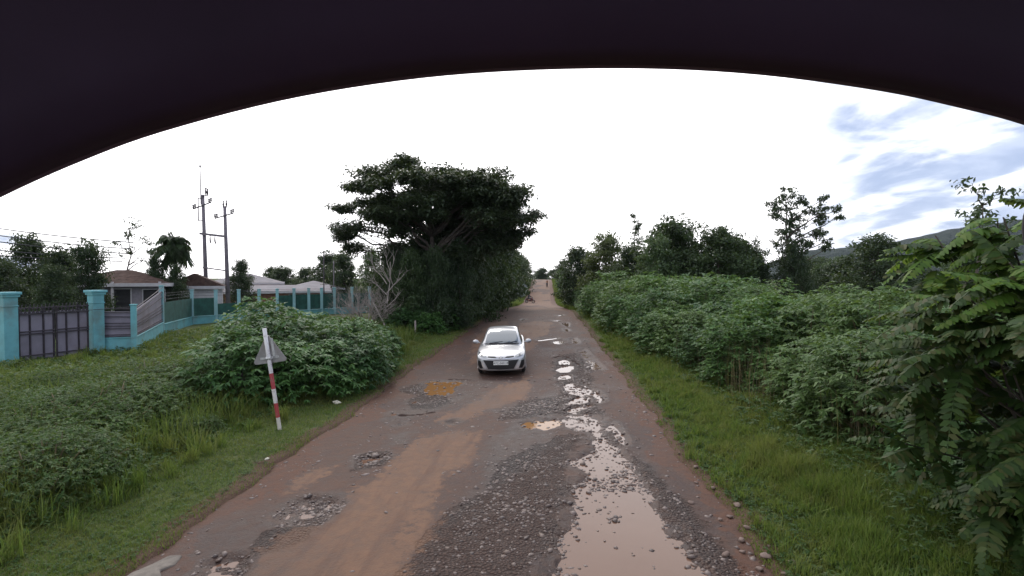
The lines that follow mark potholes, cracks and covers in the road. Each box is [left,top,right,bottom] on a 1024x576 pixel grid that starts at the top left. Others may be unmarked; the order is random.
pothole [553,364,576,373]
pothole [558,396,593,405]
pothole [352,452,392,468]
pothole [562,403,597,413]
pothole [190,549,259,576]
pothole [420,380,467,396]
pothole [516,417,562,431]
pothole [266,493,349,529]
pothole [534,410,722,576]
pothole [577,380,608,404]
